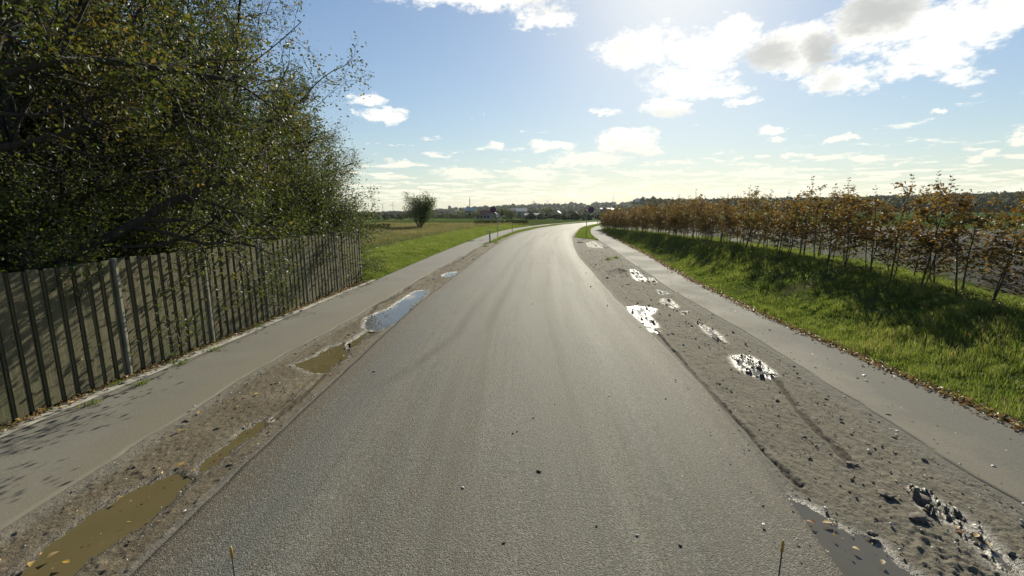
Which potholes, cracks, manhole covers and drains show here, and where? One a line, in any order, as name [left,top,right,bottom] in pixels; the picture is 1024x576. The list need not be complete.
pothole [10,472,199,576]
pothole [362,289,428,333]
pothole [730,354,775,380]
pothole [194,417,277,474]
pothole [628,306,658,328]
pothole [910,484,965,525]
pothole [292,342,351,374]
pothole [695,320,730,344]
pothole [786,495,922,576]
pothole [629,268,647,282]
